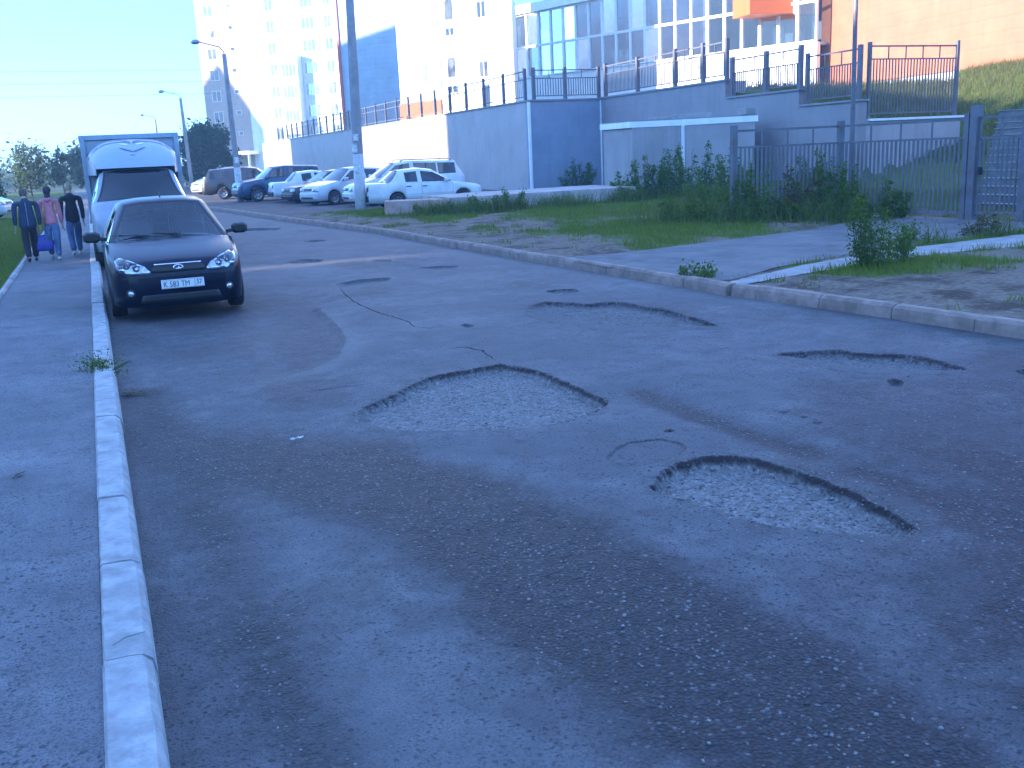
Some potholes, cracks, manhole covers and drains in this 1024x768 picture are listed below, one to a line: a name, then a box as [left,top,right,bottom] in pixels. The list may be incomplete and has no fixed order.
pothole [774,349,969,374]
pothole [336,277,391,288]
pothole [647,454,919,537]
crack [342,290,445,329]
pothole [524,302,717,332]
pothole [355,363,609,432]
